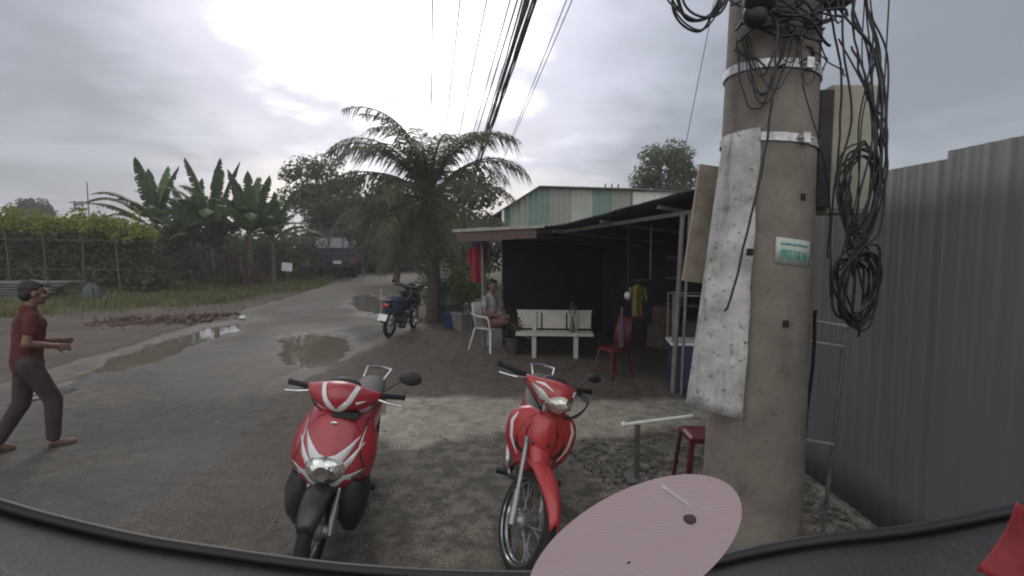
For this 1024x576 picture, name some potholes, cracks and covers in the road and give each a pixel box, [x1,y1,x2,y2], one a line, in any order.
pothole [275,332,358,374]
